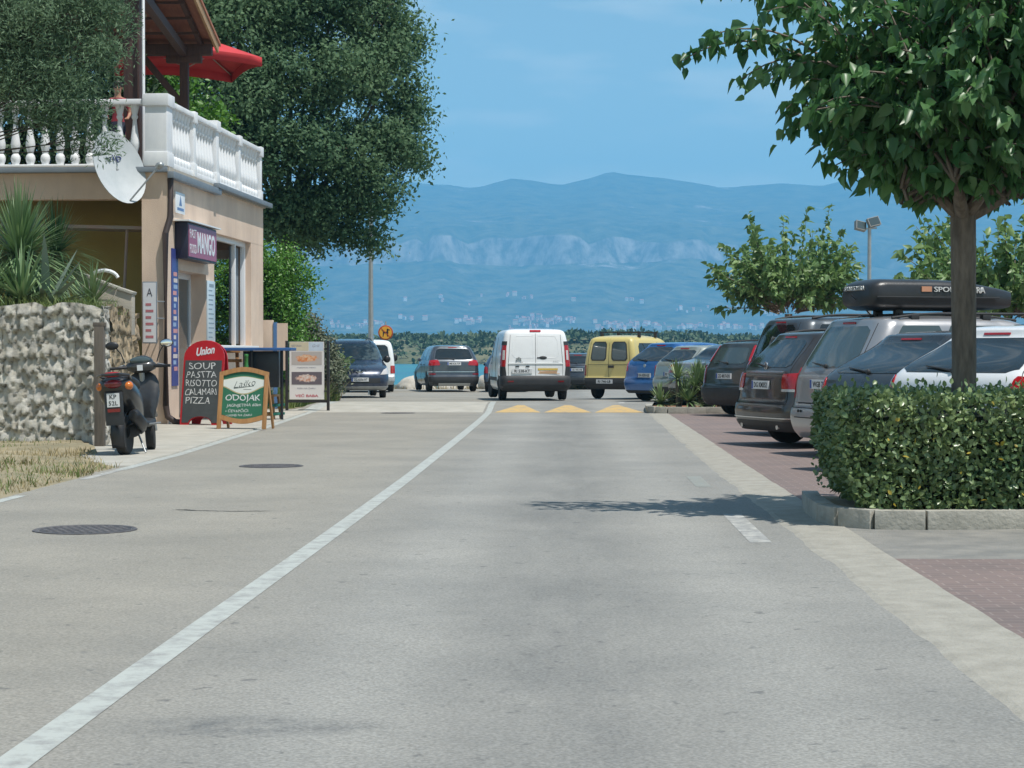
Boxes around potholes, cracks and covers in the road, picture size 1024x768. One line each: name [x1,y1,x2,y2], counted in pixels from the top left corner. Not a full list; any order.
manhole cover [32,524,138,535]
